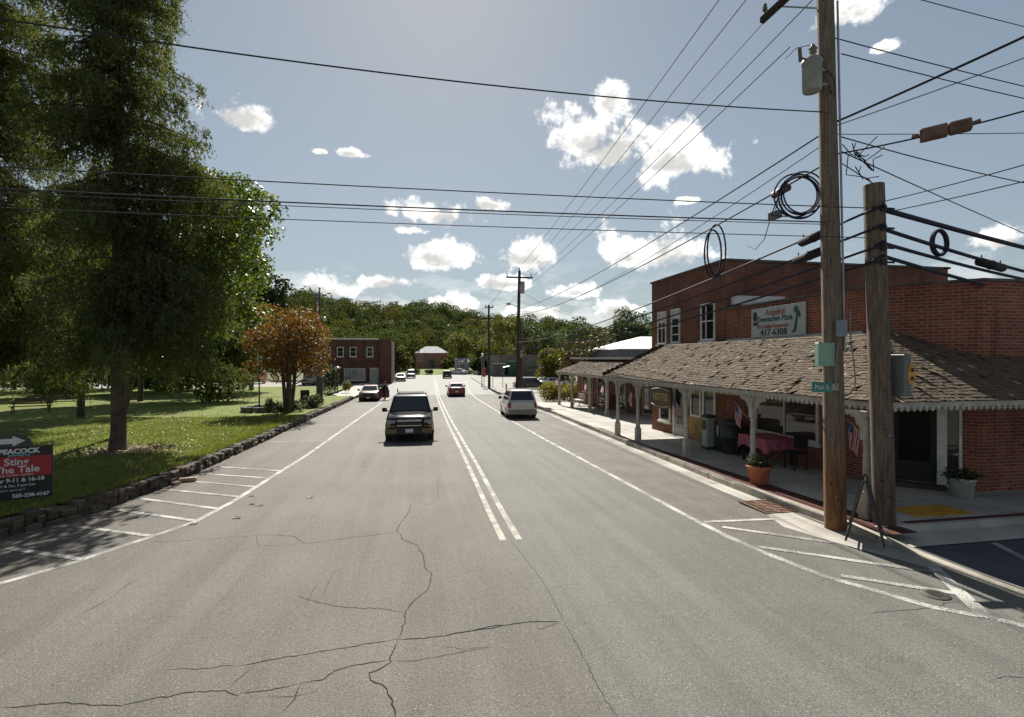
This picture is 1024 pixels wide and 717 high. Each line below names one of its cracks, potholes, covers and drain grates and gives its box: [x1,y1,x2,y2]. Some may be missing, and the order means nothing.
manhole cover [919,589,952,601]
drain grate [738,499,797,514]
crack [18,476,560,717]
